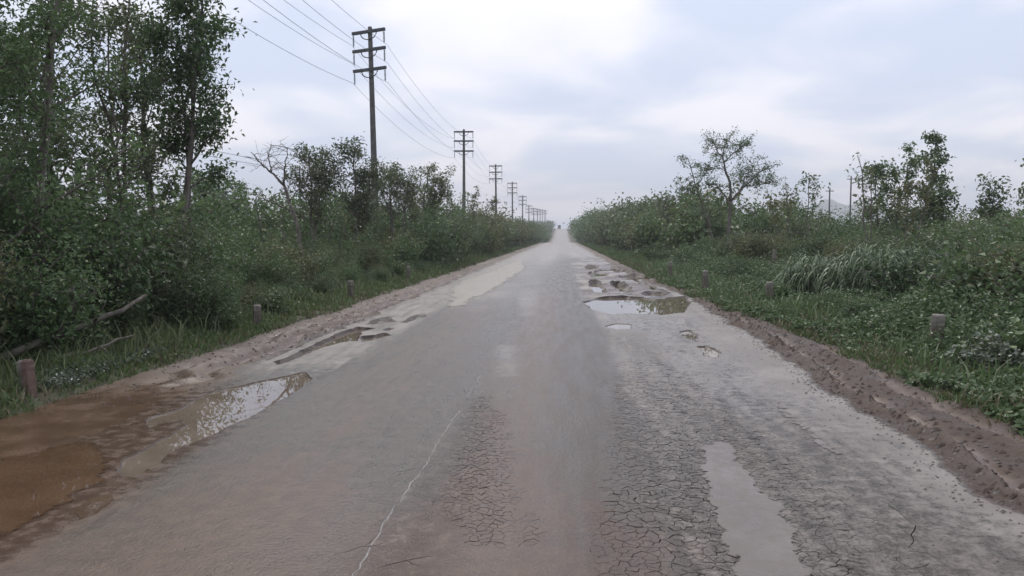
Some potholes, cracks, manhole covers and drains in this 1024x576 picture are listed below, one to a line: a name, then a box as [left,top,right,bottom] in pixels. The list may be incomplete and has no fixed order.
crack [581,356,940,576]
pothole [588,279,607,293]
pothole [274,327,375,366]
pothole [696,345,721,358]
pothole [680,329,698,341]
pothole [610,280,636,293]
pothole [365,315,397,325]
crack [335,377,547,576]
pothole [116,372,313,478]
pothole [360,332,391,342]
pothole [582,295,692,315]
